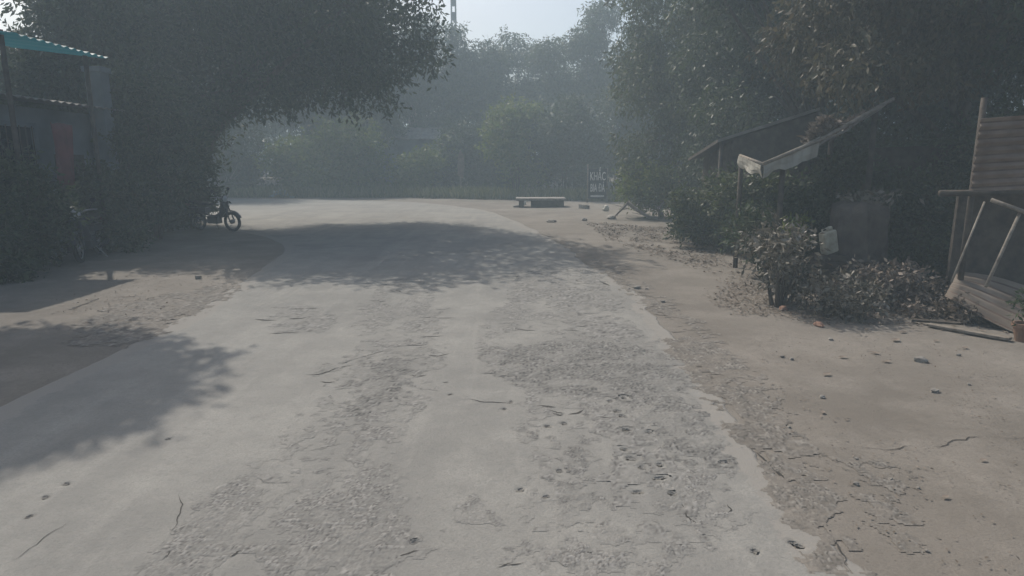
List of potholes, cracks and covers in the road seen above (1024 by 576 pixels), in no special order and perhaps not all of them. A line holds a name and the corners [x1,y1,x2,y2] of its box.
pothole [637,476,699,524]
crack [868,436,1024,450]
